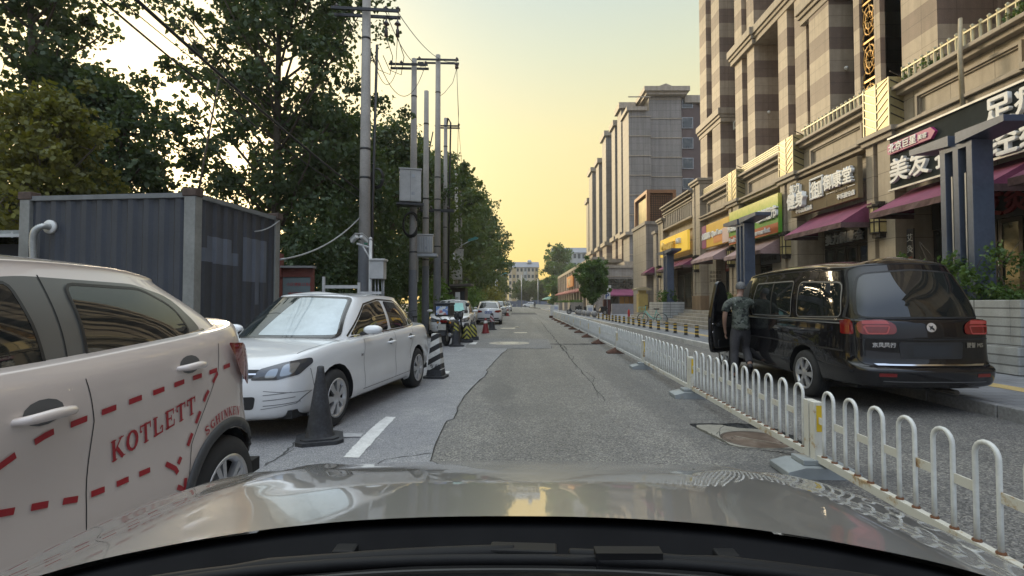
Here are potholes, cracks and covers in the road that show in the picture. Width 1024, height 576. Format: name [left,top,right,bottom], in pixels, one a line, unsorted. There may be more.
manhole cover [697,424,794,451]
crack [377,323,605,464]
